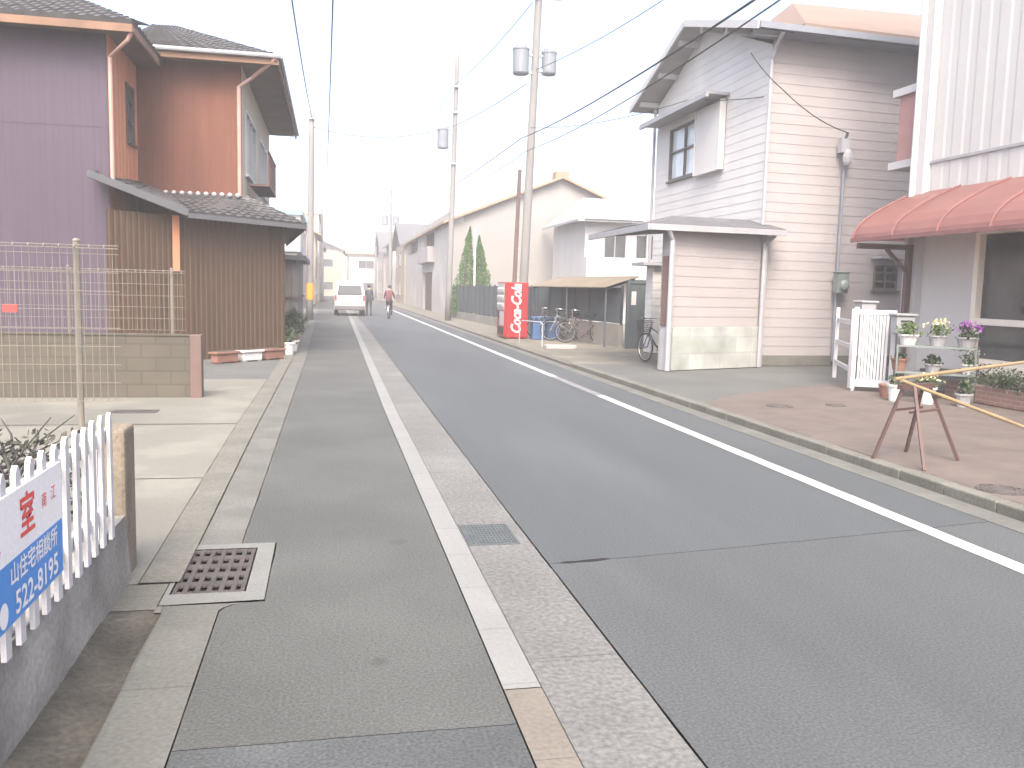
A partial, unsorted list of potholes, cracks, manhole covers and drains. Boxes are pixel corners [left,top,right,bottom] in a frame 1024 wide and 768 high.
manhole cover [975,484,1024,498]
drain grate [158,542,275,629]
